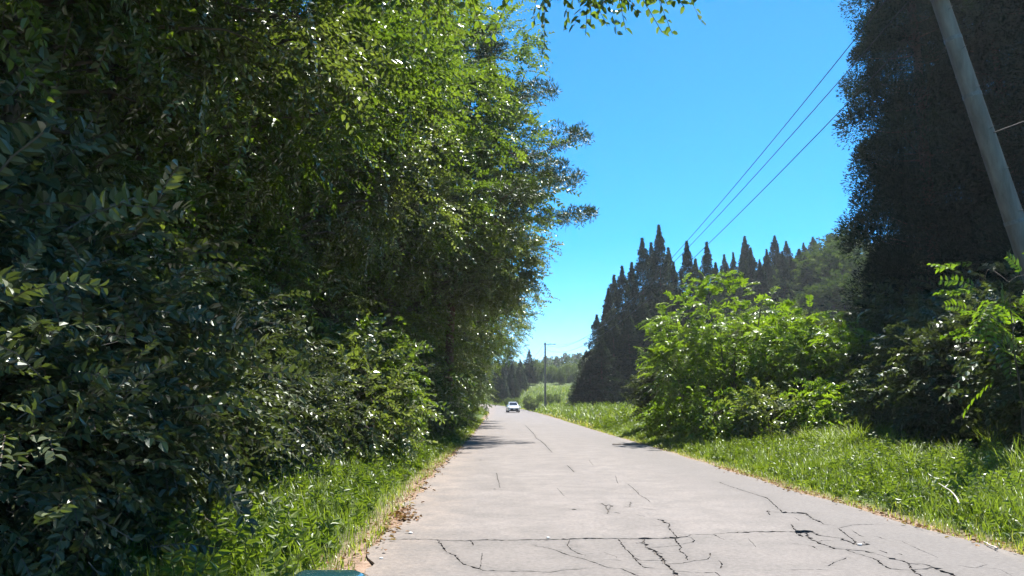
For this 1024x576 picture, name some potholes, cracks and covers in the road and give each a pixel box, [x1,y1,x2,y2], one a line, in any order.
crack [381,476,996,576]
